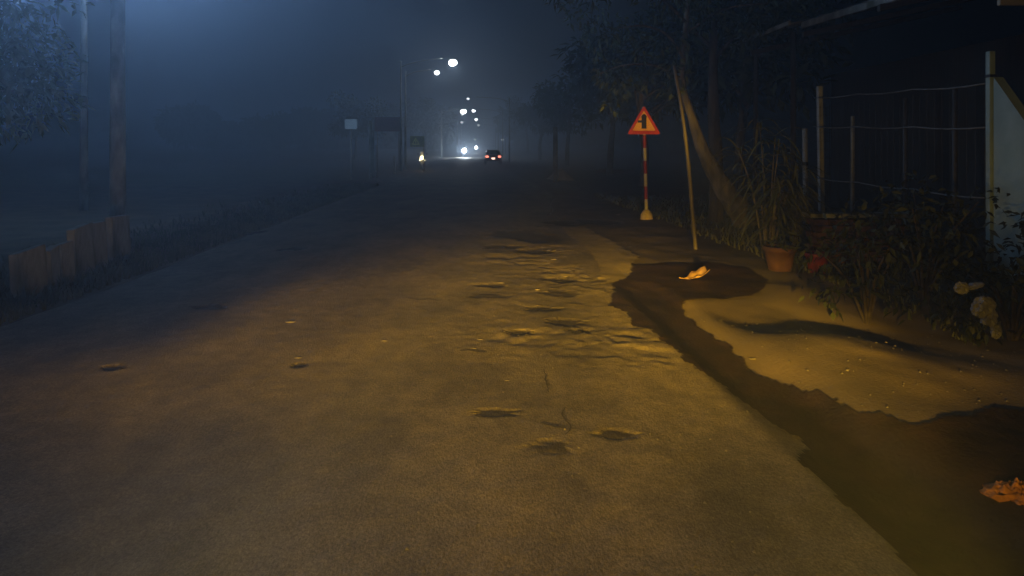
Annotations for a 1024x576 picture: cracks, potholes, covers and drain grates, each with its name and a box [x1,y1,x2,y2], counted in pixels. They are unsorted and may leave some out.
crack [541,370,571,435]
pothole [585,427,648,441]
pothole [517,437,578,457]
pothole [466,407,524,418]
